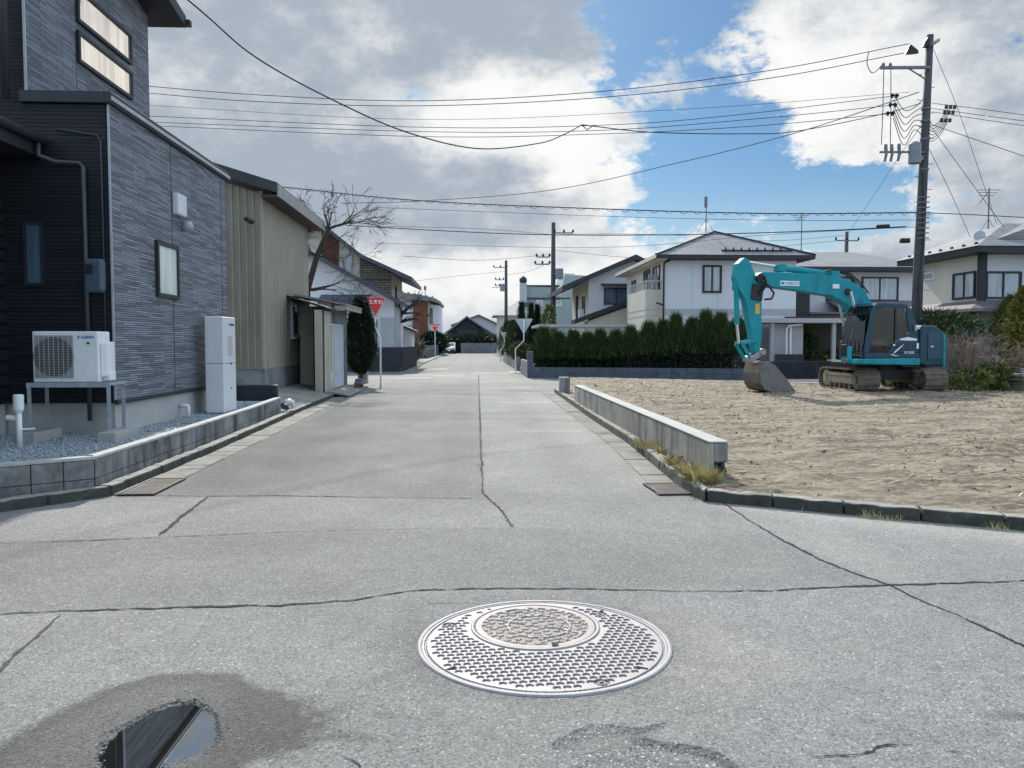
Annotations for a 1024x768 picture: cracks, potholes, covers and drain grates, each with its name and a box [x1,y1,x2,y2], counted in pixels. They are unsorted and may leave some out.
crack [814,743,912,757]
crack [18,375,514,543]
drain grate [116,478,187,495]
manhole cover [417,600,673,697]
pothole [89,697,230,768]
crack [2,503,1024,647]
drain grate [643,482,692,495]
